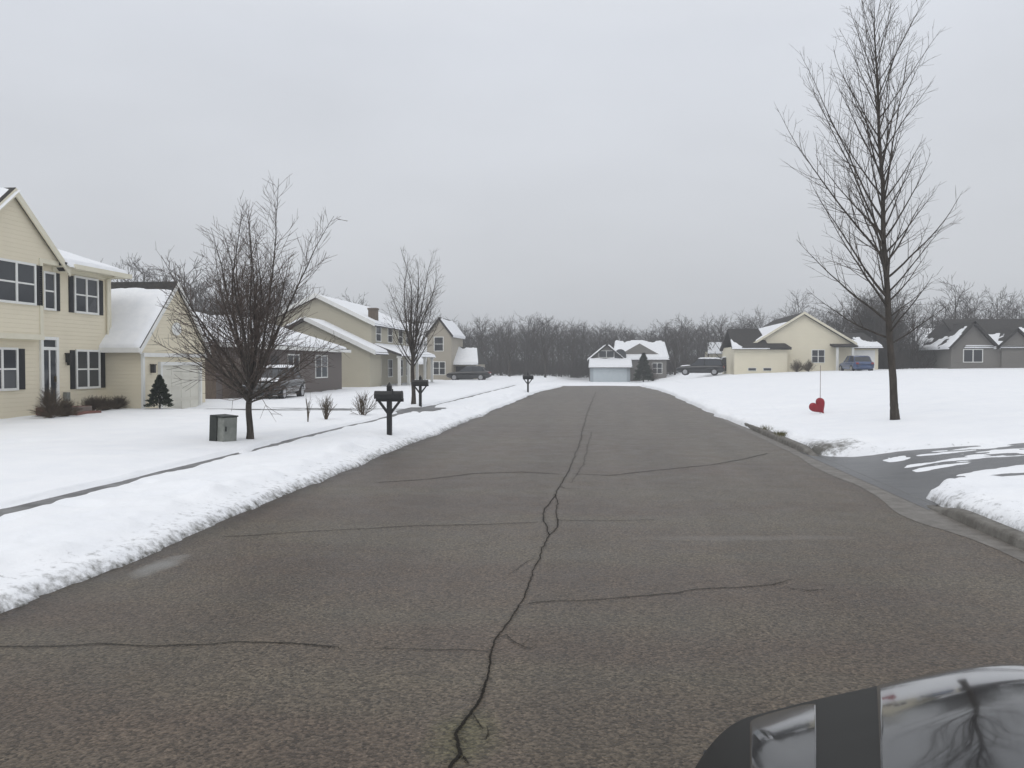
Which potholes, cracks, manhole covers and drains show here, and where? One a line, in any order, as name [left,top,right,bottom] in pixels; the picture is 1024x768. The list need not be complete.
crack [0,466,787,768]
